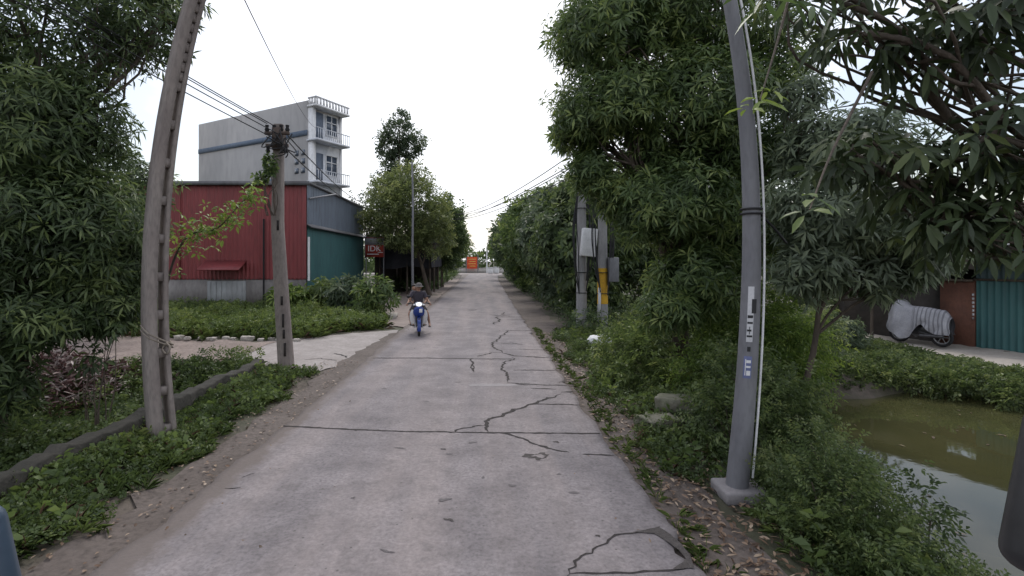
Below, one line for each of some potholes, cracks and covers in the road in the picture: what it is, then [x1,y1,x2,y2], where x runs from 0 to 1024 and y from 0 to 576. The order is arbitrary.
crack [454,312,579,452]
crack [567,526,687,576]
